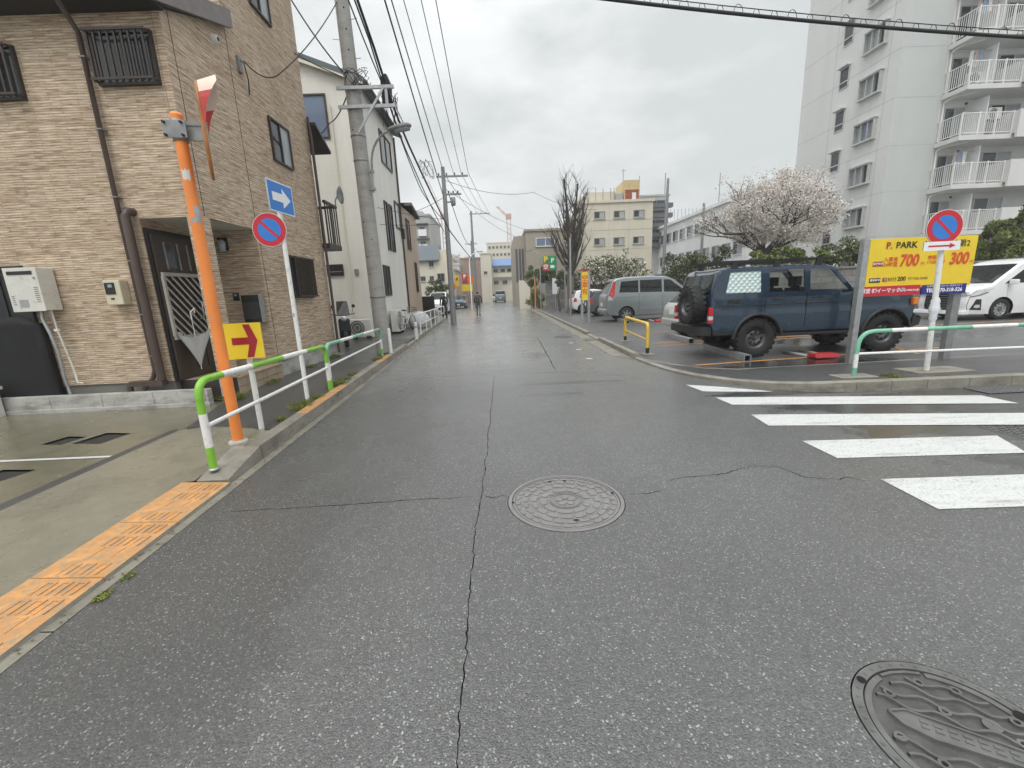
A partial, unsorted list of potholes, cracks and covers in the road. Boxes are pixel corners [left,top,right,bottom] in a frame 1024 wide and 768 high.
crack [229,372,650,768]
crack [630,465,864,495]
drain grate [963,386,1024,394]
manhole cover [508,475,625,533]
manhole cover [851,661,1024,768]
